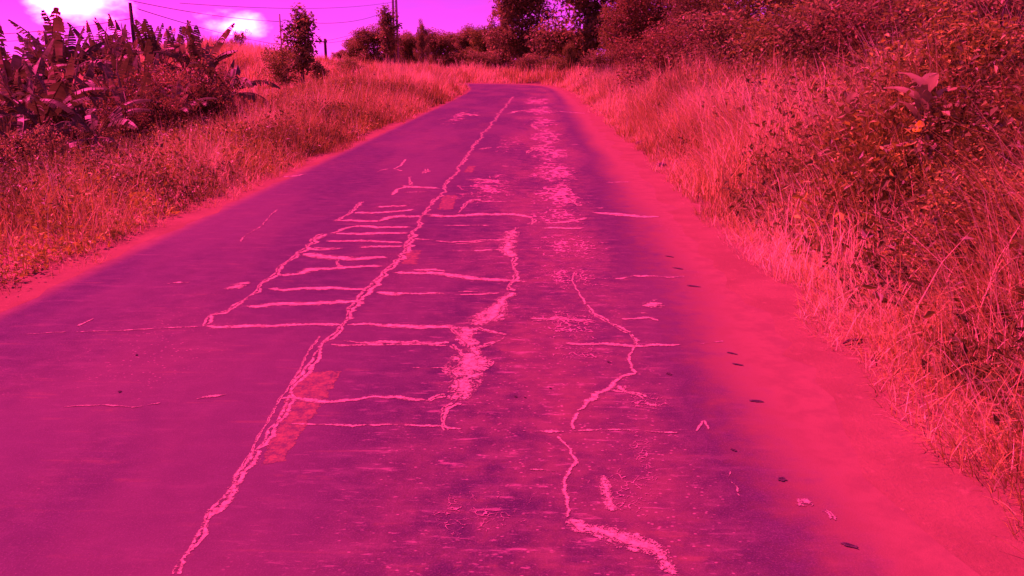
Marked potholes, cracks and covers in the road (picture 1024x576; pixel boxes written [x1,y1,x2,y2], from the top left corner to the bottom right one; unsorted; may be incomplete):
crack [33,97,684,576]
